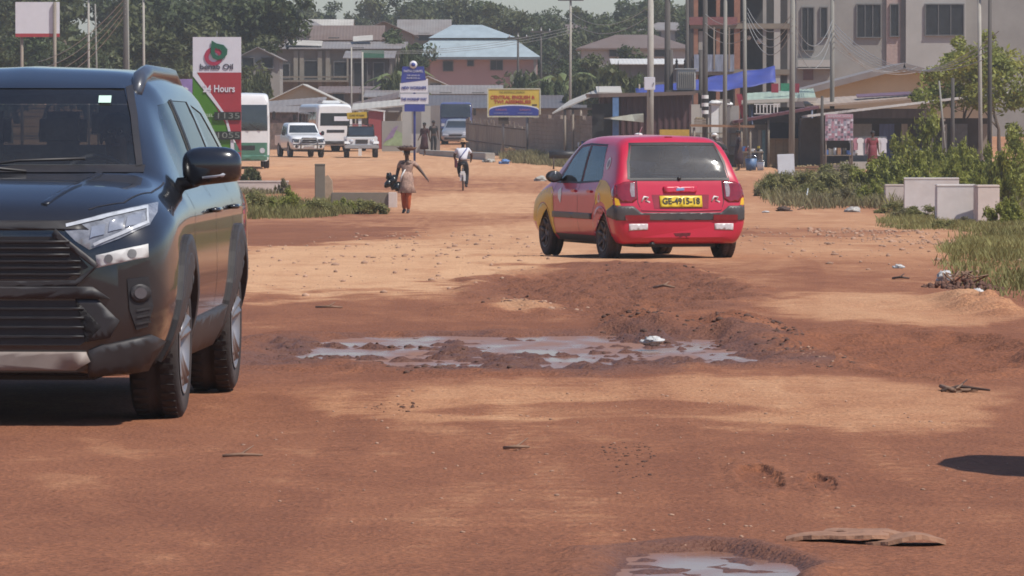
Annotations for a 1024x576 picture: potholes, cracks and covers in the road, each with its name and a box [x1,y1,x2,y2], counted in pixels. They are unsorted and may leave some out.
pothole [543,536,848,576]
pothole [240,313,862,377]
